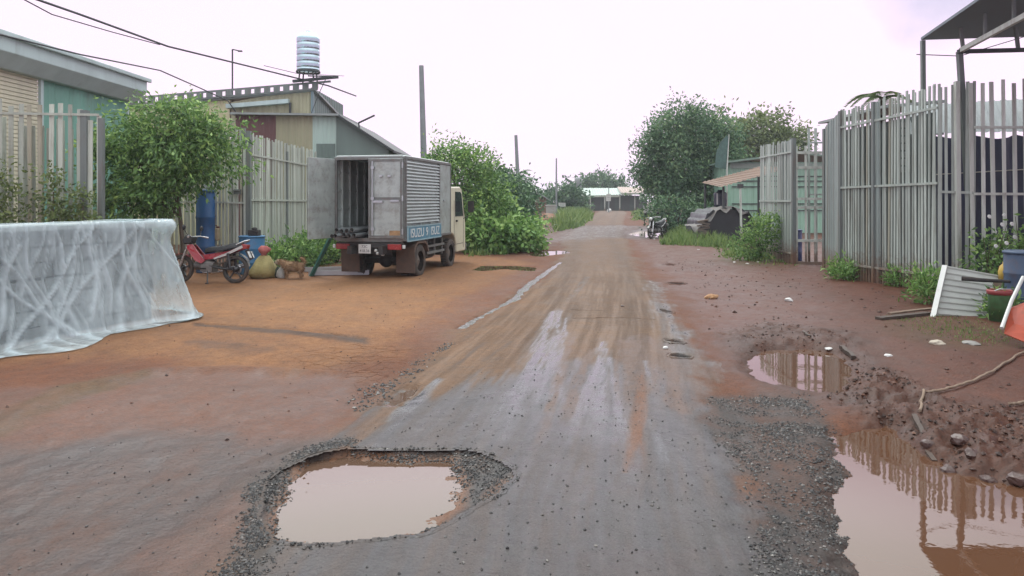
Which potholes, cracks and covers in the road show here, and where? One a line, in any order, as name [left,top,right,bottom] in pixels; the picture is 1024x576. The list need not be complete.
pothole [667,352,694,360]
pothole [251,445,522,550]
crack [293,344,411,392]
